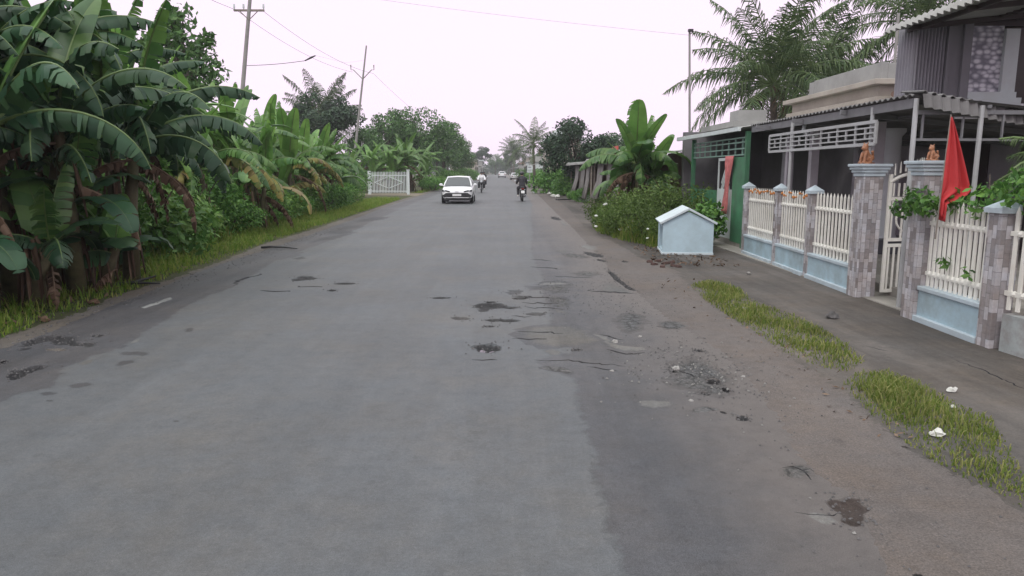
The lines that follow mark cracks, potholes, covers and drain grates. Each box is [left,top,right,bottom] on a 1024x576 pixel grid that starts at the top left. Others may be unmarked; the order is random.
pothole [825,496,872,527]
crack [540,334,645,371]
pothole [16,335,98,351]
pothole [471,303,522,312]
pothole [471,343,502,353]
crack [531,259,633,294]
pothole [5,364,50,380]
